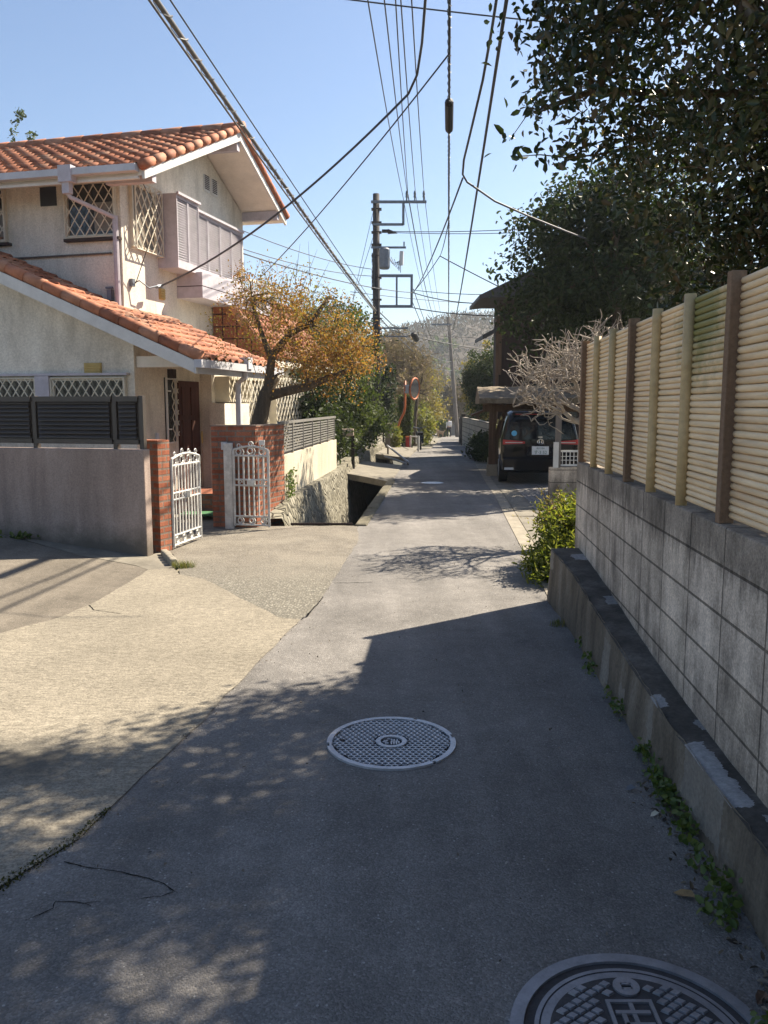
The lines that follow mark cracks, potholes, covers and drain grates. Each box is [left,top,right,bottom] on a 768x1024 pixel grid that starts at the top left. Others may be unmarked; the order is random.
manhole cover [510,953,761,1024]
manhole cover [327,717,456,771]
crack [64,861,175,899]
crack [26,901,100,920]
